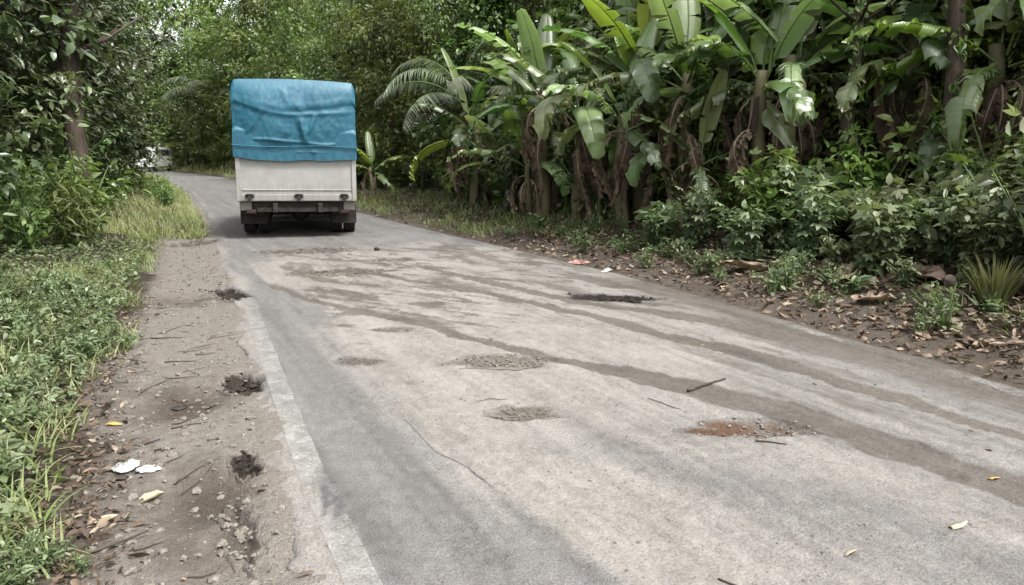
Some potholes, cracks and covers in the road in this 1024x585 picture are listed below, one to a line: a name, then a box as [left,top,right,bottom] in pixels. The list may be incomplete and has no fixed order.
pothole [481,405,563,422]
pothole [330,356,388,367]
pothole [437,353,561,369]
pothole [671,417,825,440]
pothole [561,292,672,304]
pothole [209,287,254,303]
pothole [227,449,264,484]
pothole [218,370,268,397]
